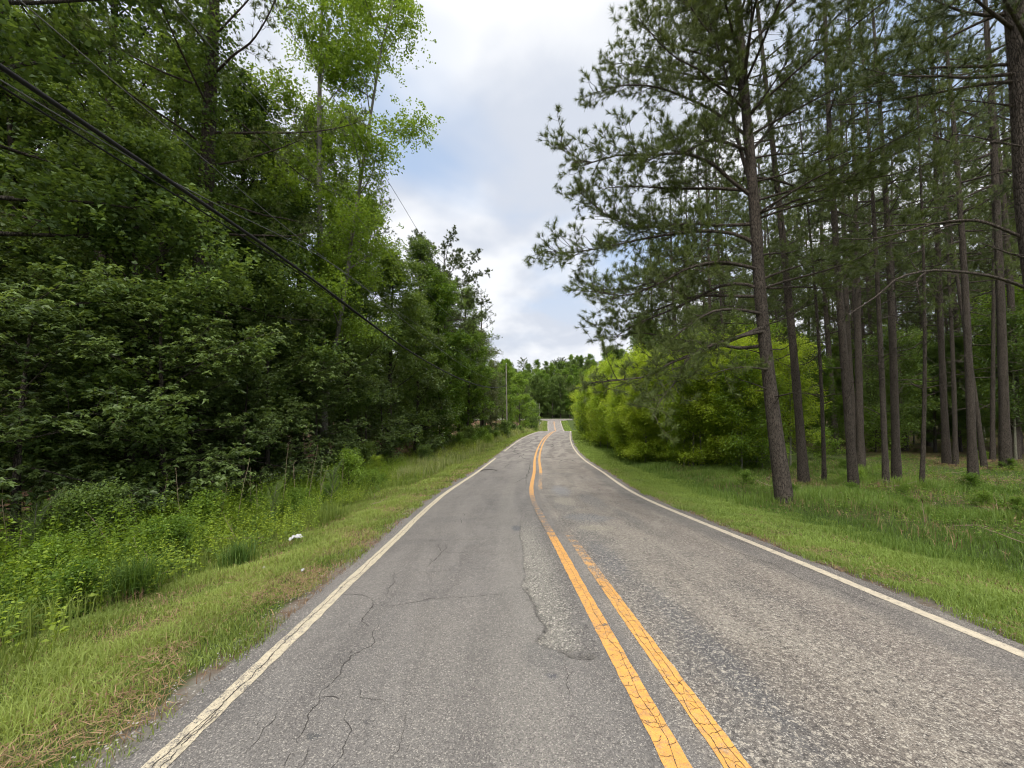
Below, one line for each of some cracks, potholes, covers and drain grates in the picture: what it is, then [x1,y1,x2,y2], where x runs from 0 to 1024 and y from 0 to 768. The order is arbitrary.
crack [151,510,512,768]
